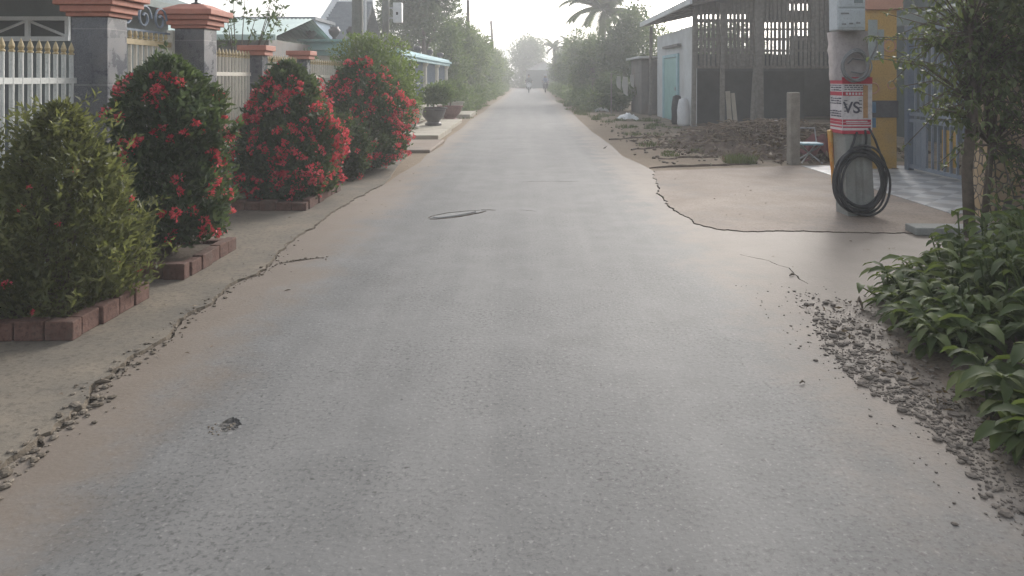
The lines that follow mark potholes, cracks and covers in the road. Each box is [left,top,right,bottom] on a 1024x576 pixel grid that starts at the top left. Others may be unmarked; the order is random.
pothole [208,417,242,435]
crack [0,185,382,500]
